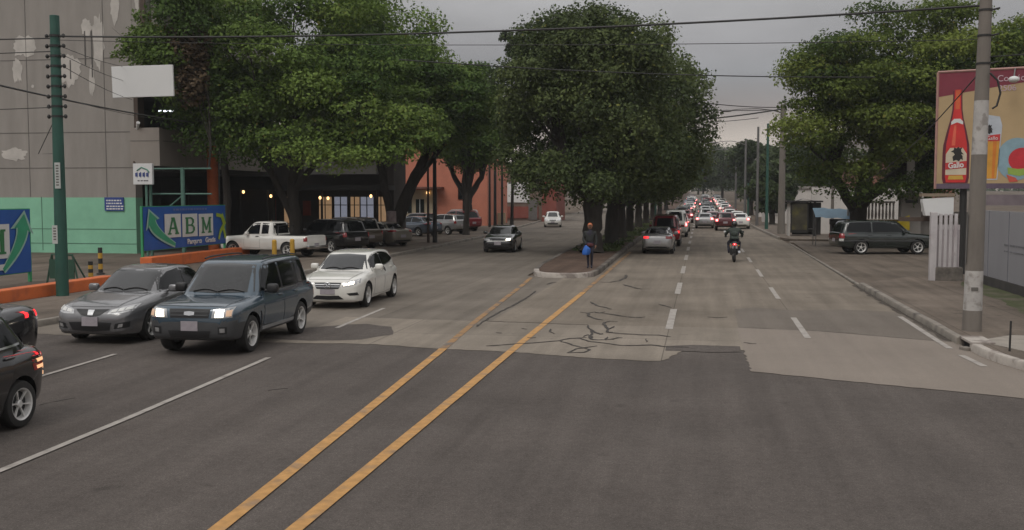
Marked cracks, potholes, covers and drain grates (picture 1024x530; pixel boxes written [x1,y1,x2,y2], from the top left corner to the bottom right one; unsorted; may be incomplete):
crack [476,282,641,338]
